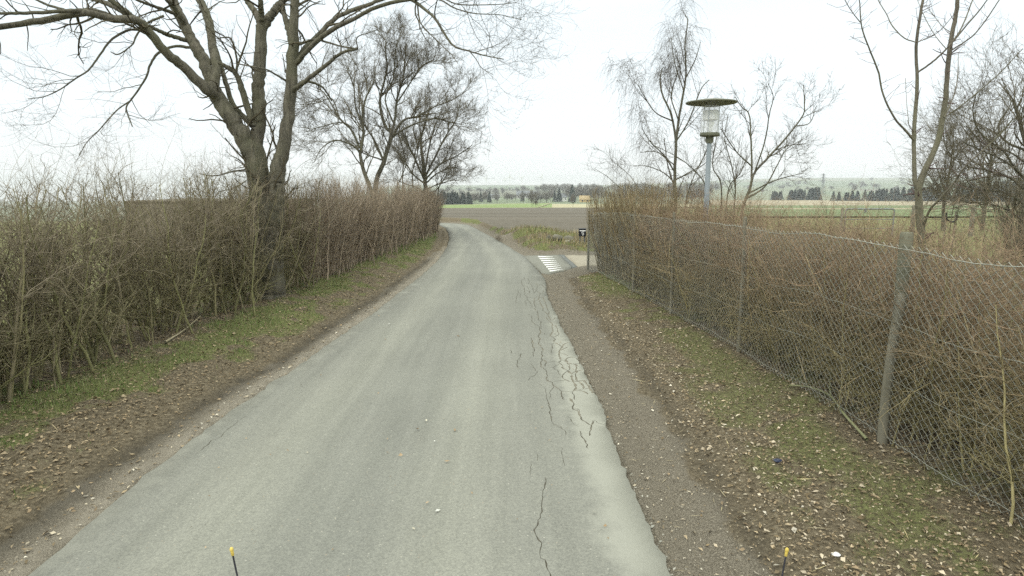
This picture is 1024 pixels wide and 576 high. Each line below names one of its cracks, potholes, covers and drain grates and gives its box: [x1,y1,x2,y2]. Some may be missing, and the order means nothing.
crack [530,453,551,576]
crack [511,278,604,466]
